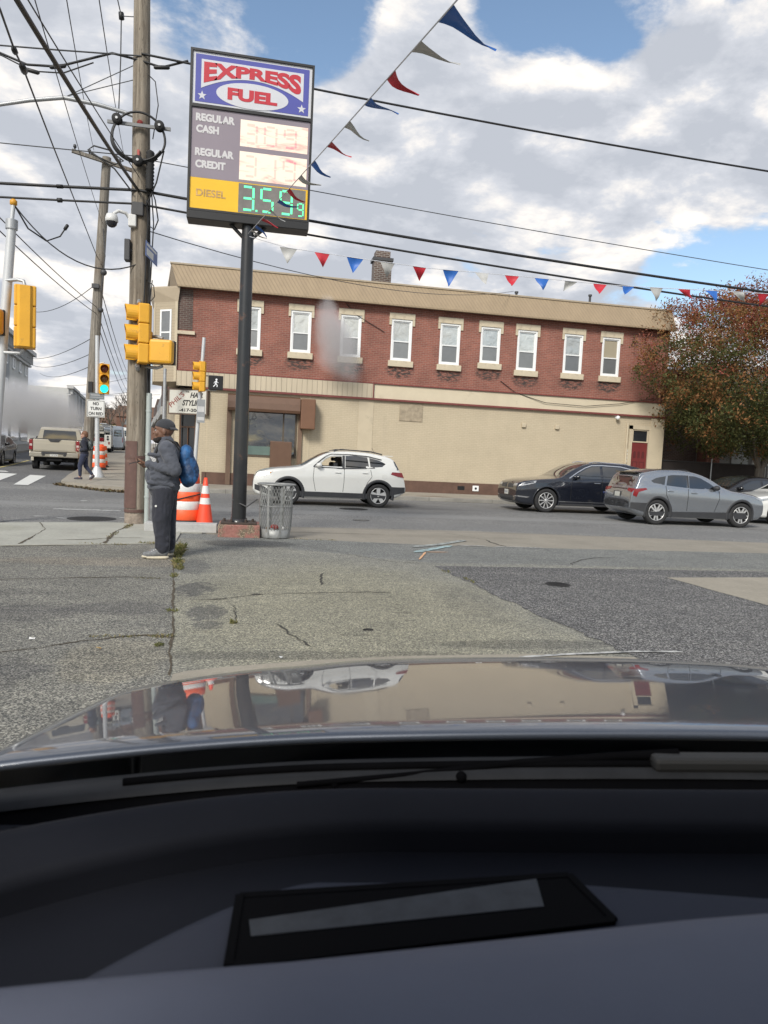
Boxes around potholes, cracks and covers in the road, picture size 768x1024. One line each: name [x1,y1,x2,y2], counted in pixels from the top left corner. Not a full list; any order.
crack [18,522,132,546]
crack [277,624,310,646]
crack [2,634,167,652]
crack [196,573,380,621]
